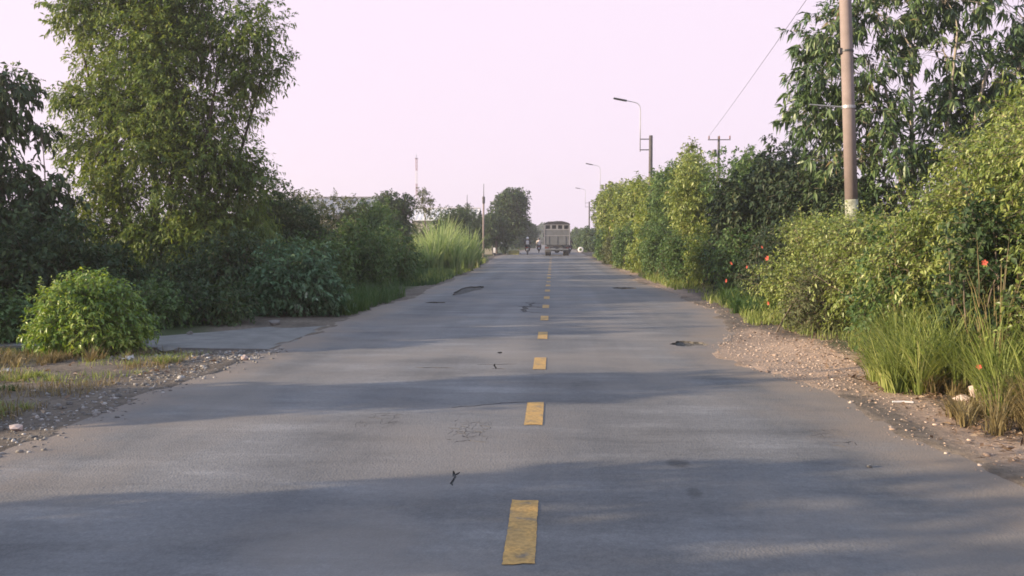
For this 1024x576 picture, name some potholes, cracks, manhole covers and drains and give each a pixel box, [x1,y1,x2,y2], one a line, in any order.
pothole [453,286,484,295]
crack [448,402,517,442]
